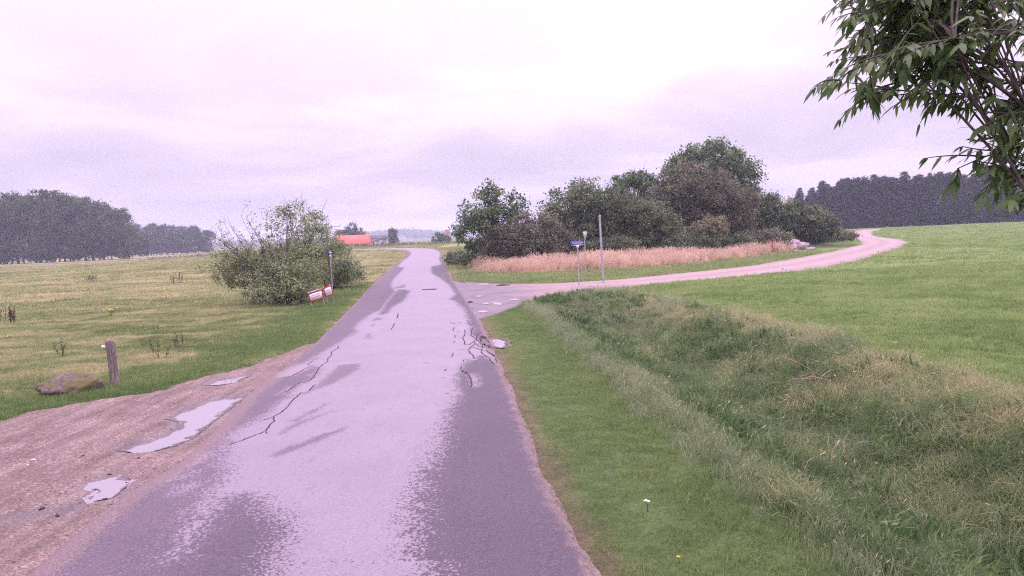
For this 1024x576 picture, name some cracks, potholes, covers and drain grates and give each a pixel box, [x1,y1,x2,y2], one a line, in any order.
pothole [82,475,135,504]
crack [229,347,339,445]
pothole [201,374,251,386]
crack [444,320,498,386]
pothole [116,390,253,454]
